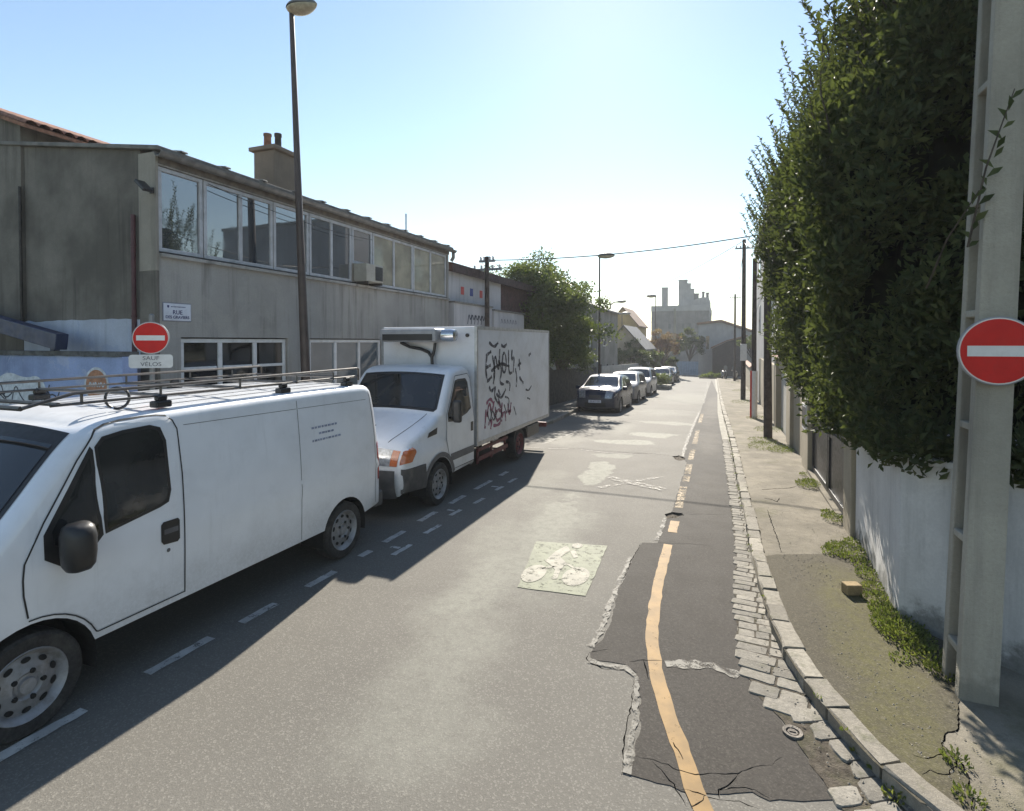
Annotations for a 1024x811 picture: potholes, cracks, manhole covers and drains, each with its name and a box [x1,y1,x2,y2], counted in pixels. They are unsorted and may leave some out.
crack [926,705,974,810]
crack [650,745,756,809]
manhole cover [782,725,804,741]
